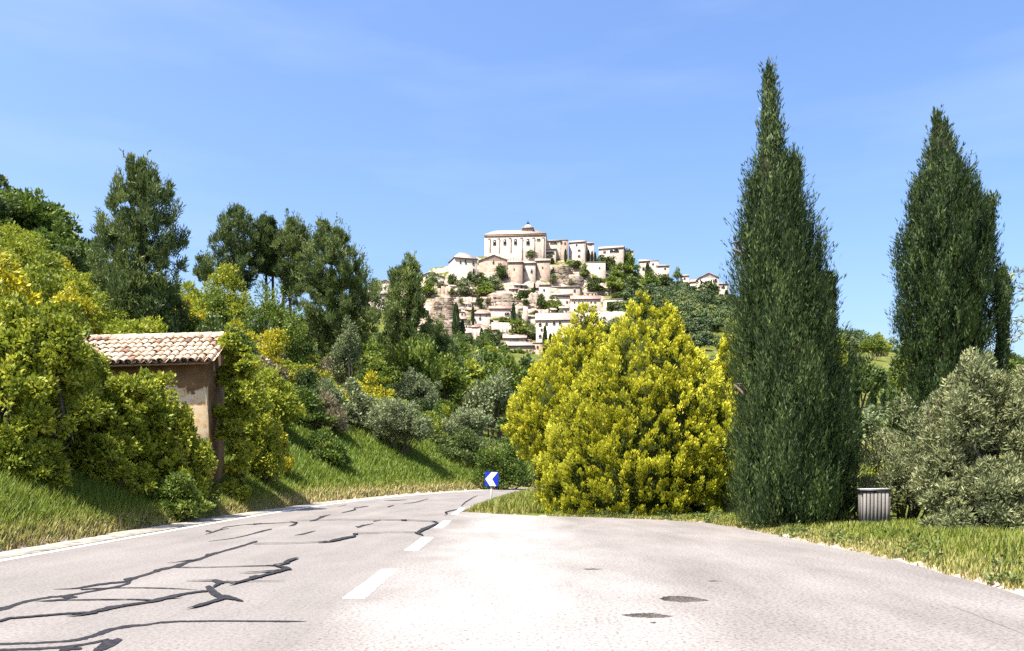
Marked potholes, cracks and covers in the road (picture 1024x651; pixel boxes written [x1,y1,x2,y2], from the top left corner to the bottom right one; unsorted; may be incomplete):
crack [0,496,476,651]
